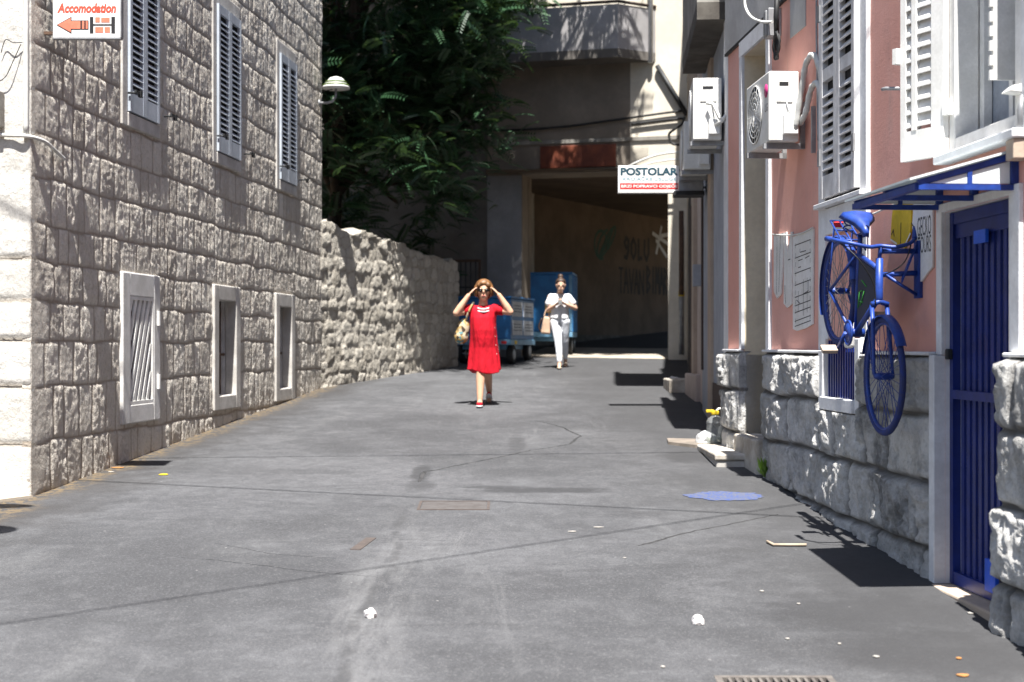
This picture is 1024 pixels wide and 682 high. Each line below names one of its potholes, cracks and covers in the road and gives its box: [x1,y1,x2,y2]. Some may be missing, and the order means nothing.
manhole cover [417,501,490,510]
crack [418,422,582,482]
